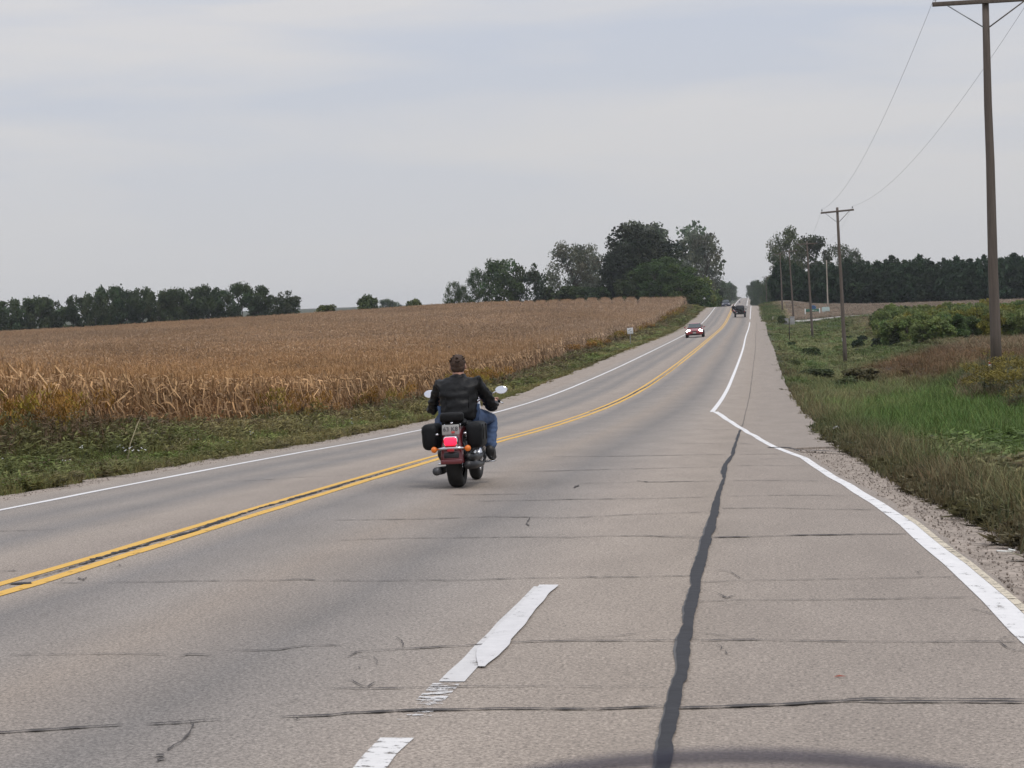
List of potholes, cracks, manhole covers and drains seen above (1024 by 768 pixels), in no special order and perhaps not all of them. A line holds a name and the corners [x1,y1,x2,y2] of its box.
crack [341,443,723,540]
crack [236,631,1014,688]
crack [0,718,220,761]
